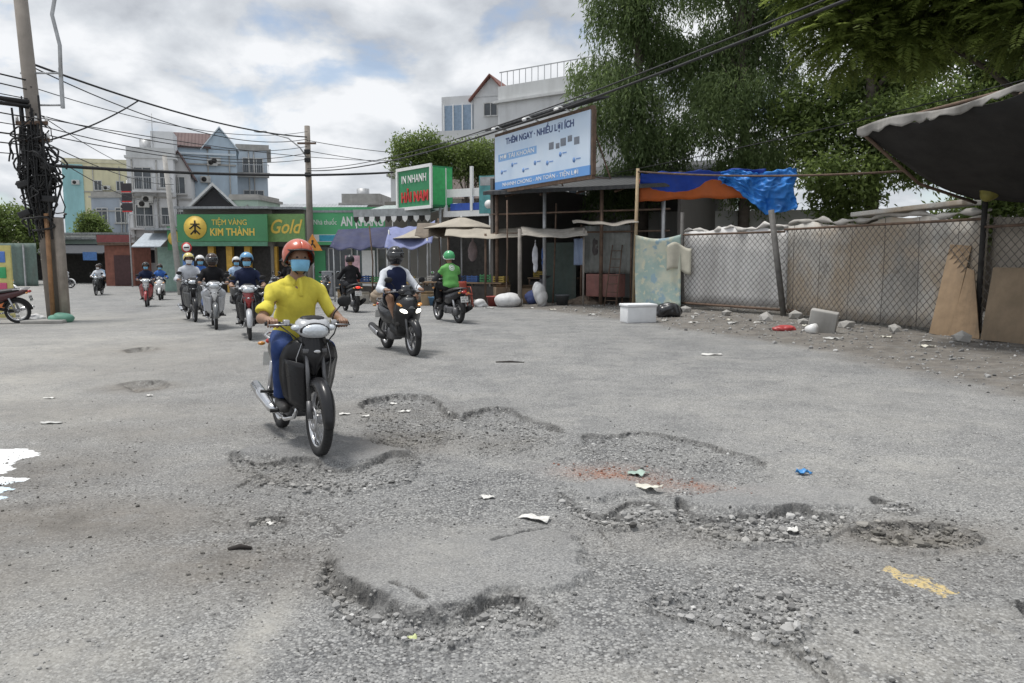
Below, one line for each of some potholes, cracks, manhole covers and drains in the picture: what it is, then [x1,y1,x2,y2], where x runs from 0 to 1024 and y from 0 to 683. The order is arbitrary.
pothole [640,585,820,647]
pothole [452,407,565,459]
pothole [850,520,984,554]
pothole [670,497,850,547]
pothole [573,431,768,473]
pothole [359,393,460,449]
pothole [557,492,671,531]
pothole [118,380,170,393]
pothole [312,558,558,650]
